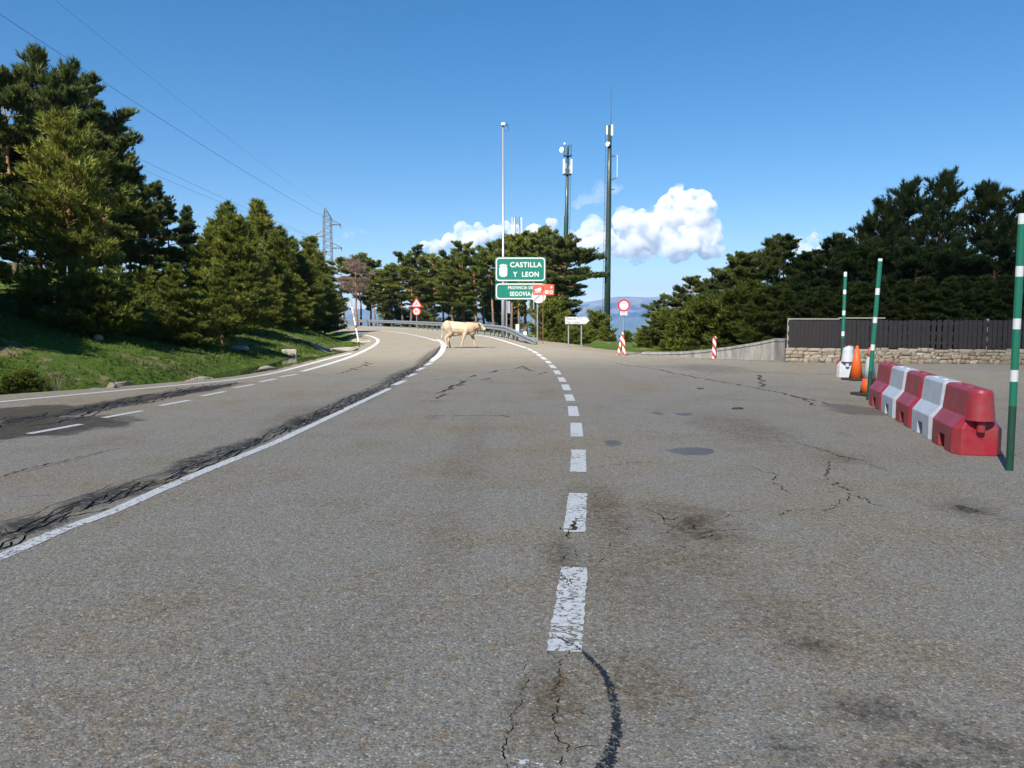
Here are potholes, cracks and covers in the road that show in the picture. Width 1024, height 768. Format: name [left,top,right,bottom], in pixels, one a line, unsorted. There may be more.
crack [554,509,763,622]
crack [741,442,890,516]
crack [502,650,599,768]
crack [436,366,545,417]
